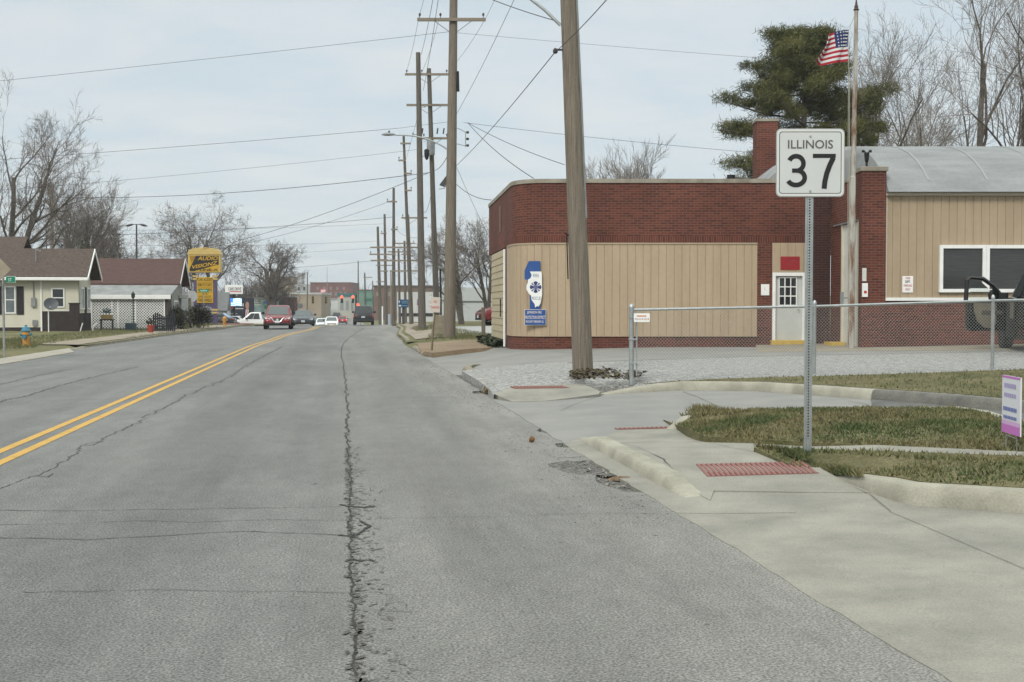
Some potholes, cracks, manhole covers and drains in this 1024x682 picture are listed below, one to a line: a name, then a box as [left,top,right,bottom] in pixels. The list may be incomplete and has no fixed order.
pothole [595,473,635,492]
crack [0,329,444,682]
pothole [548,460,615,477]
